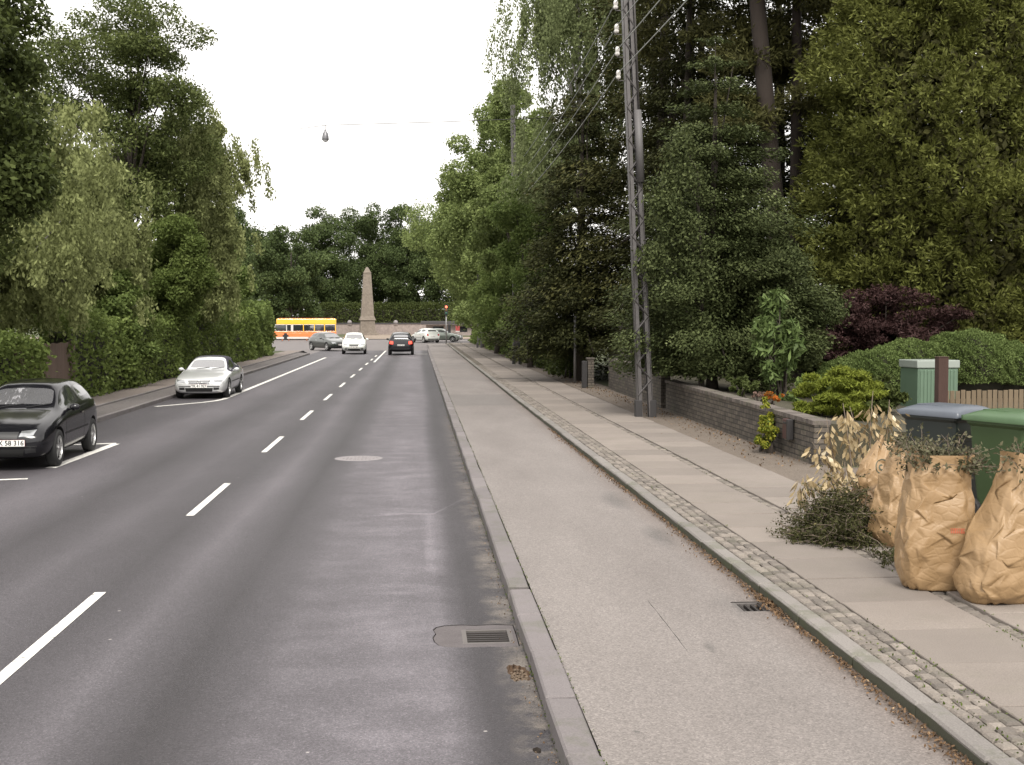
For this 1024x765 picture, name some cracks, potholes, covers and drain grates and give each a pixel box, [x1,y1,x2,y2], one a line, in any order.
pothole [506,664,531,682]
drain grate [461,629,515,644]
drain grate [732,602,770,612]
